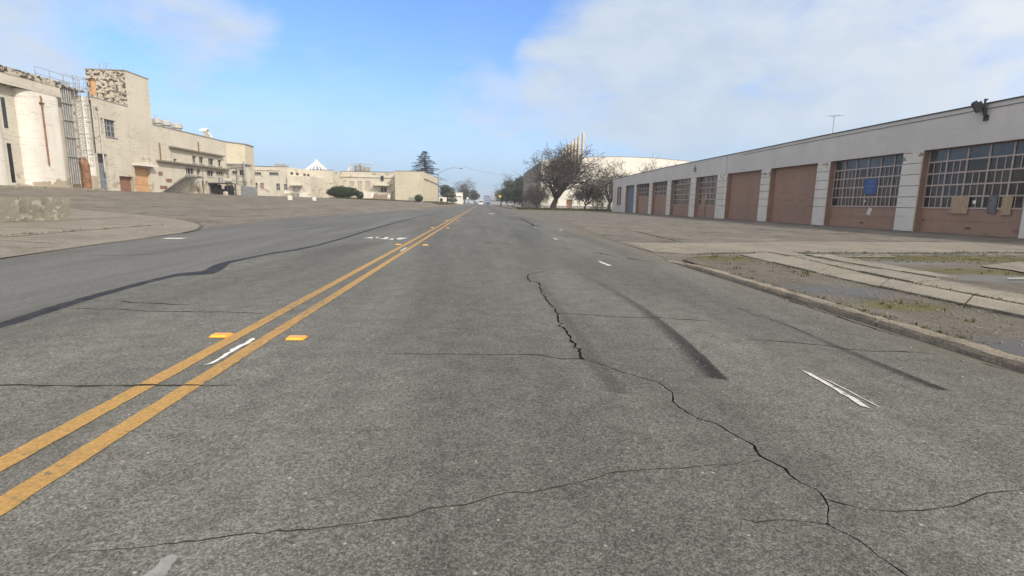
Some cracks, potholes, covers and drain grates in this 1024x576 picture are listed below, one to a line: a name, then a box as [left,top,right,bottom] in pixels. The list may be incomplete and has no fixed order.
crack [82,460,762,552]
crack [392,266,1018,576]
crack [76,300,243,313]
